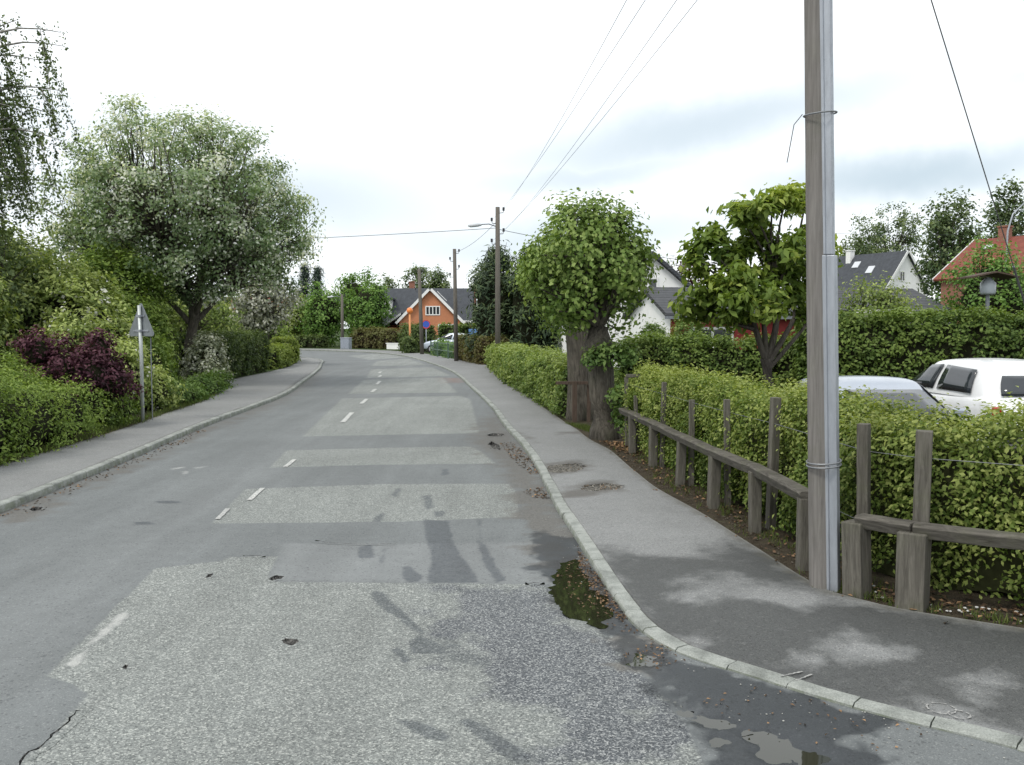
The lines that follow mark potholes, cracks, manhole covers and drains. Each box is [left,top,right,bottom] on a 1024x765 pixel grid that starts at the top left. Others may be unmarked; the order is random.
pothole [277,636,304,648]
pothole [546,463,588,474]
pothole [264,574,288,582]
crack [6,710,88,765]
pothole [579,483,625,491]
